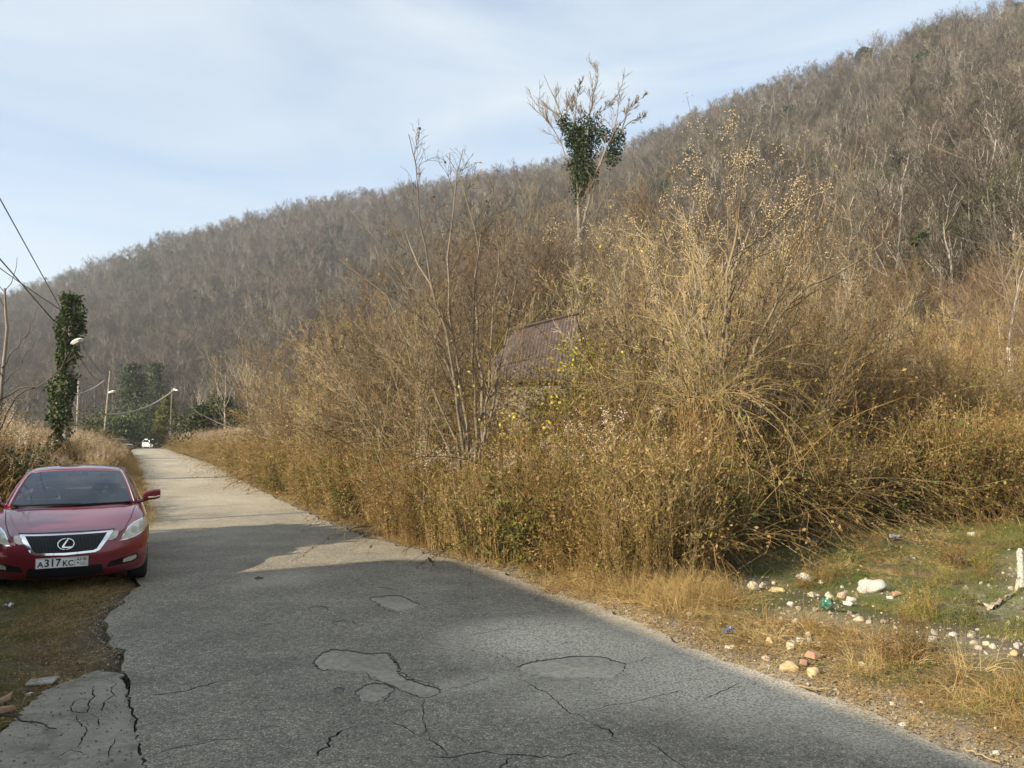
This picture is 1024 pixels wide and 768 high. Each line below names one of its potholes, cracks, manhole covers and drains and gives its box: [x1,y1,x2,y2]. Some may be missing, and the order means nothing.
crack [56,679,124,761]
crack [152,680,299,756]
crack [315,714,354,757]
crack [366,652,683,768]
